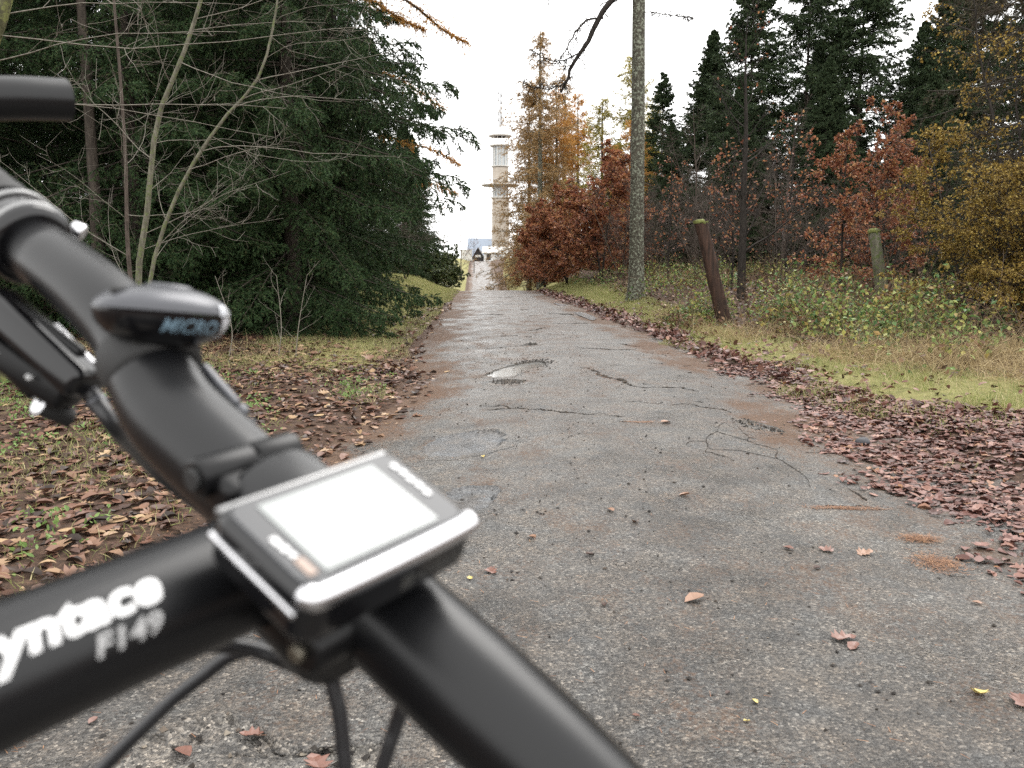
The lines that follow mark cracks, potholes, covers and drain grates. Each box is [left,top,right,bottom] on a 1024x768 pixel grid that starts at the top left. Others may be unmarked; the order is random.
pothole [479,358,552,379]
pothole [483,378,535,386]
crack [689,422,810,486]
crack [489,400,729,422]
